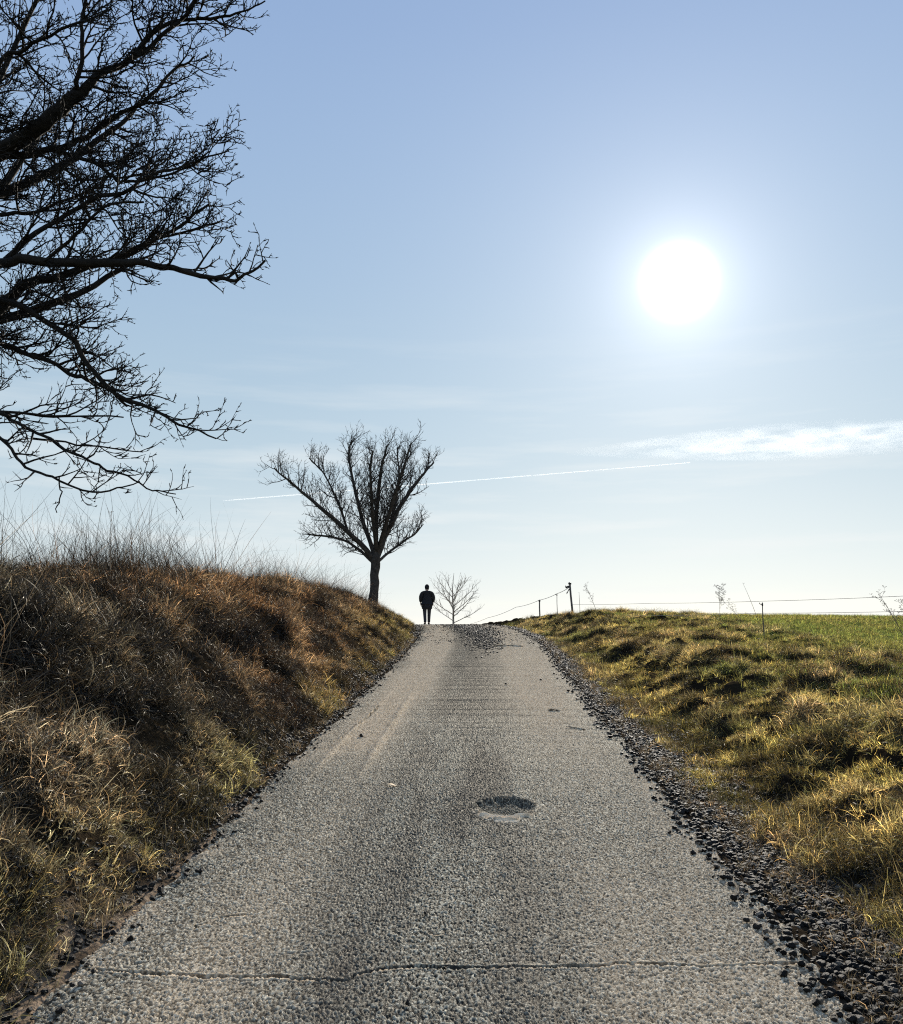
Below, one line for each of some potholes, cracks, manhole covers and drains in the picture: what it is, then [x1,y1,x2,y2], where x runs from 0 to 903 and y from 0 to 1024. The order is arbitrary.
crack [95,932,801,985]
pothole [467,794,542,823]
